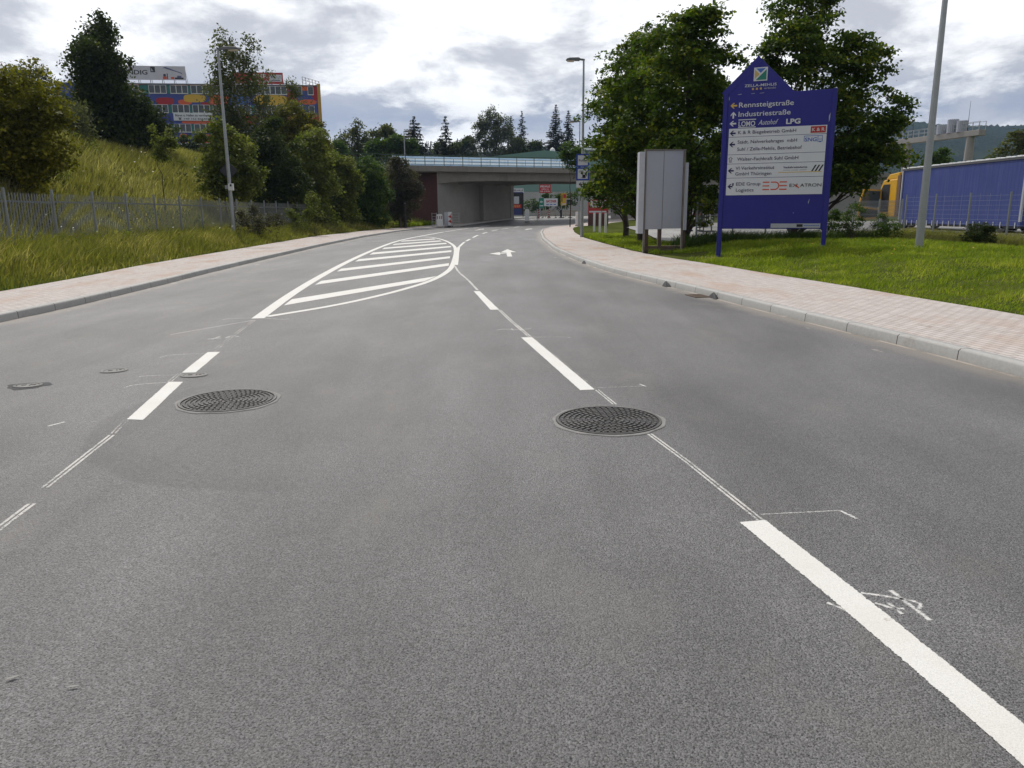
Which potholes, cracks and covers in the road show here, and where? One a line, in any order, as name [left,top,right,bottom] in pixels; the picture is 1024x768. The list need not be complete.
manhole cover [174,389,281,414]
manhole cover [552,406,666,437]
utility cover [7,382,52,390]
